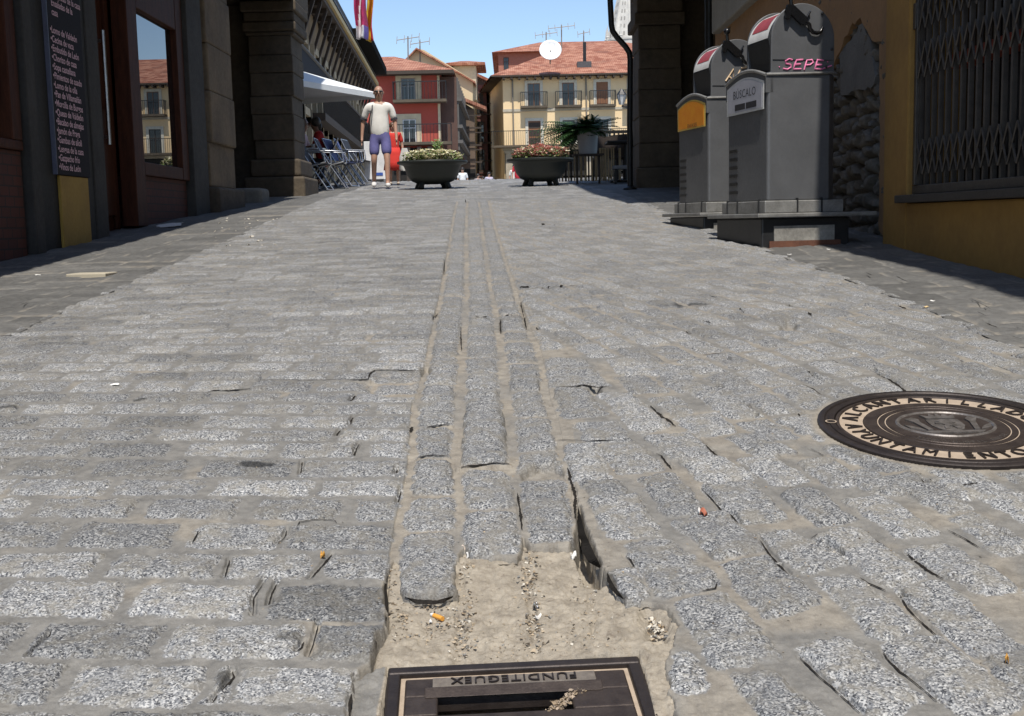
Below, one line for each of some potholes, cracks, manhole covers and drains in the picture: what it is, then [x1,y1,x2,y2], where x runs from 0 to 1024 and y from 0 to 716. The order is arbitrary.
manhole cover [817,391,1024,470]
pothole [351,510,676,716]
crack [577,504,634,599]
